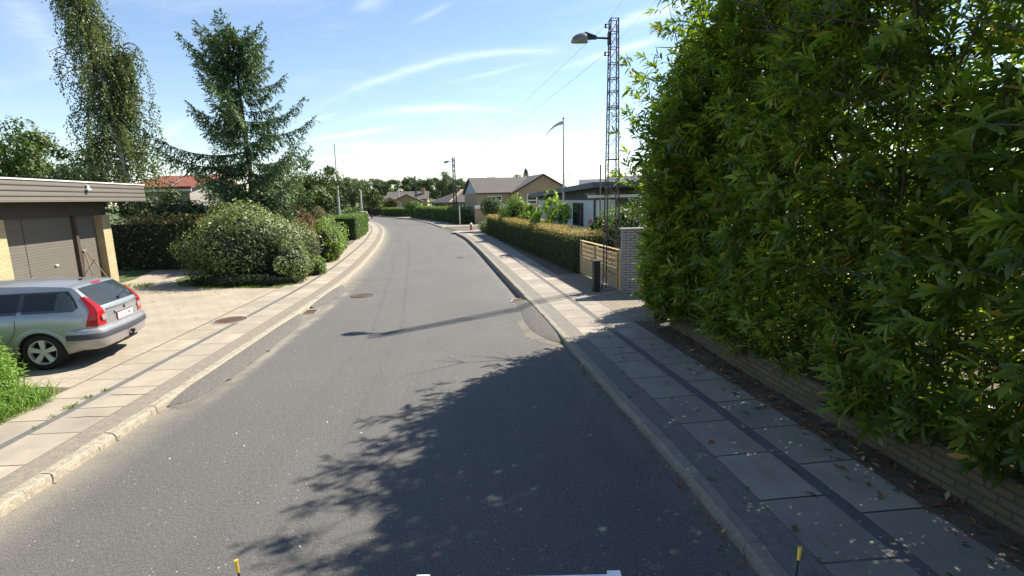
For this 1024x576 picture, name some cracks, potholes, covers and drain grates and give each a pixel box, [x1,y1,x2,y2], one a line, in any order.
manhole cover [211,316,249,324]
